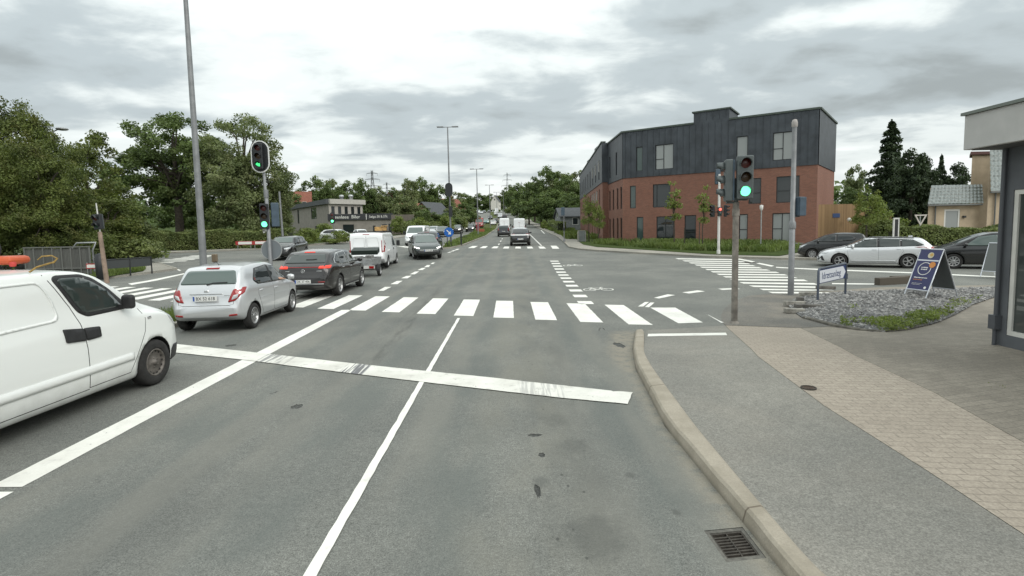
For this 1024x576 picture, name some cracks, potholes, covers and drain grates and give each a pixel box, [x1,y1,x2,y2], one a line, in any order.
drain grate [705,527,766,562]
